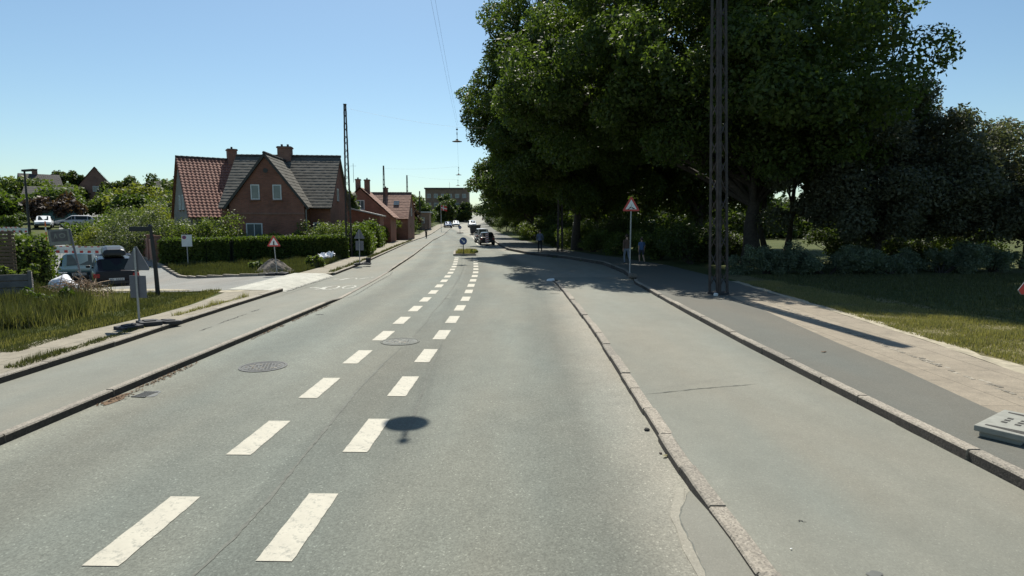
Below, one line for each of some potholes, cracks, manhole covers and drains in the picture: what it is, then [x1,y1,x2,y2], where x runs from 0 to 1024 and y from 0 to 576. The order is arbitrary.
manhole cover [238,361,288,372]
manhole cover [380,338,420,346]
